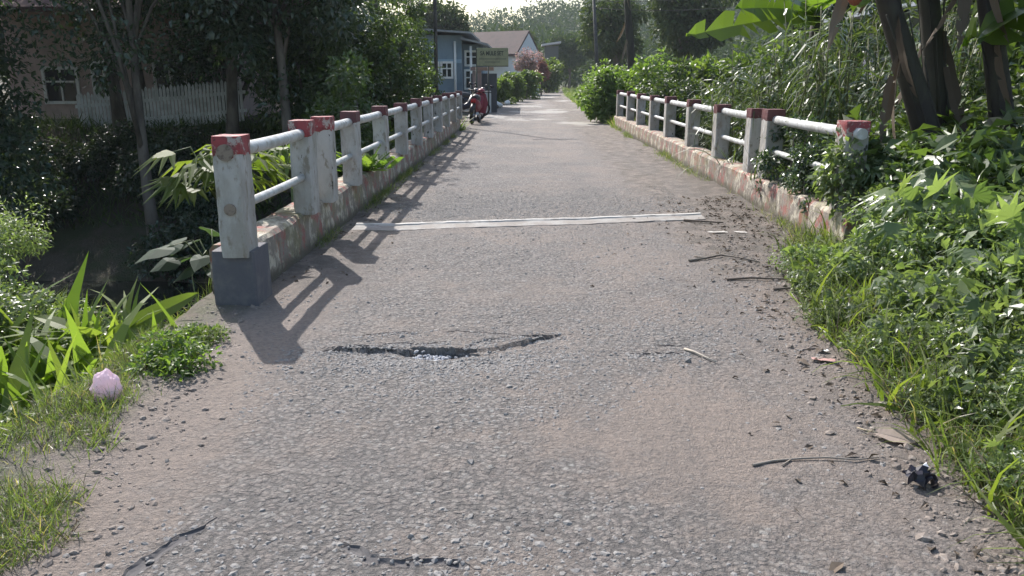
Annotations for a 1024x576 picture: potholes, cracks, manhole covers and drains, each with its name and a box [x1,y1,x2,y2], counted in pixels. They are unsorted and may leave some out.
crack [628,344,689,356]
crack [327,539,482,573]
crack [119,517,221,576]
pothole [393,346,492,363]
